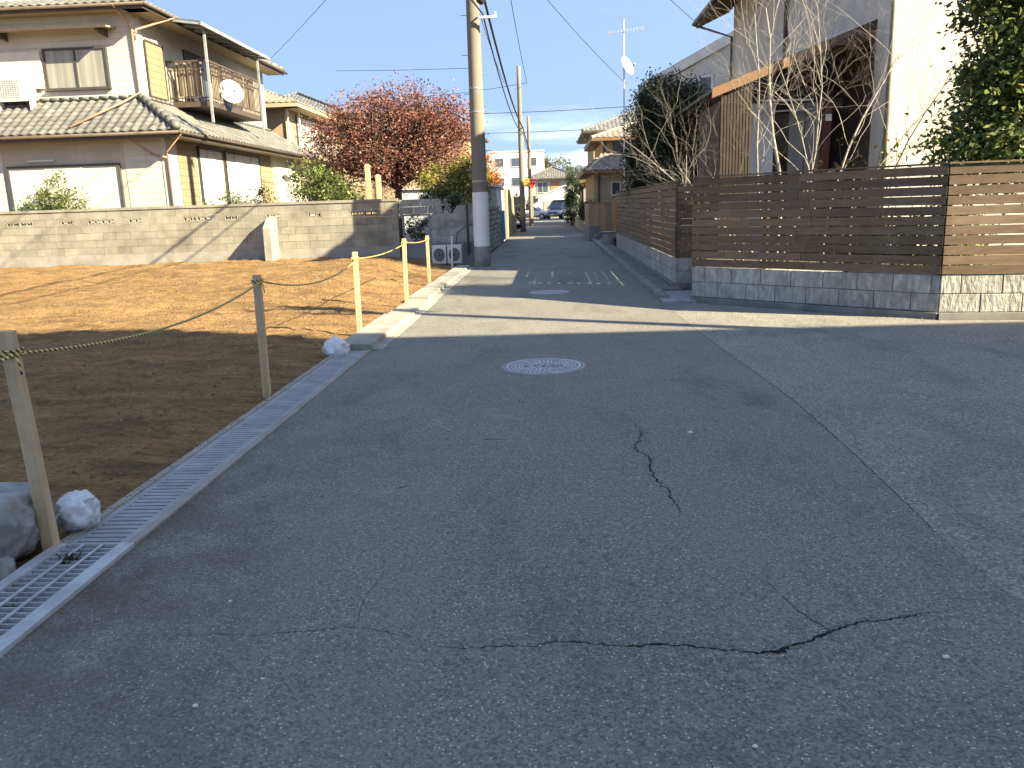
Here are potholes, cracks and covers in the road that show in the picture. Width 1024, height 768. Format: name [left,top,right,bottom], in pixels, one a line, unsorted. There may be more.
crack [143,560,955,658]
manhole cover [502,358,586,375]
crack [634,425,681,512]
